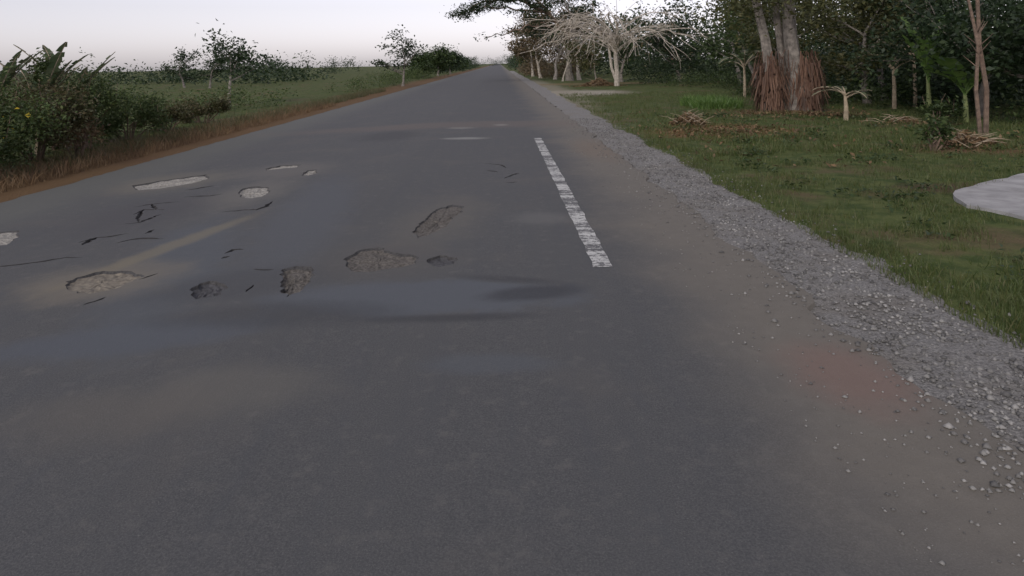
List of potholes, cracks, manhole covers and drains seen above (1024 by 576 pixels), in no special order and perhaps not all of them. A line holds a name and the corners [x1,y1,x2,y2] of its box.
pothole [190,281,228,299]
pothole [279,266,315,297]
pothole [65,271,144,294]
crack [0,202,172,267]
crack [221,249,274,292]
pothole [412,205,464,238]
pothole [427,255,458,267]
pothole [343,247,419,272]
